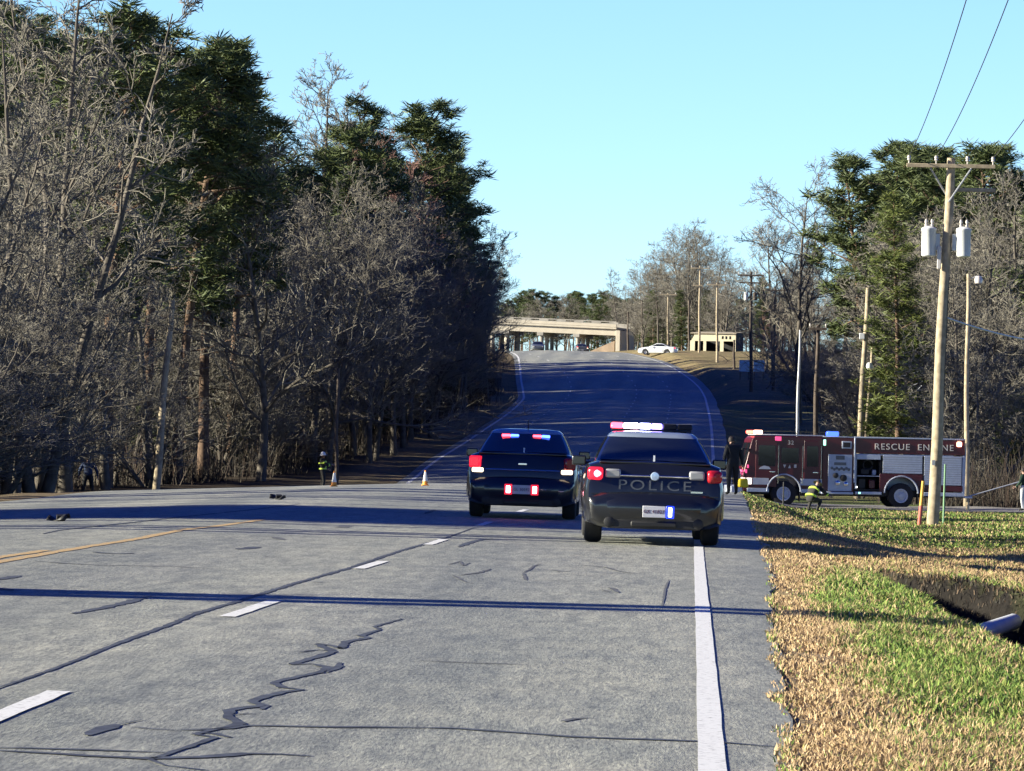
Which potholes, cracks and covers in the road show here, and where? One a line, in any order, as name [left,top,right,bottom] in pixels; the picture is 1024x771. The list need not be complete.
crack [448,539,490,584]
crack [522,564,636,593]
crack [73,596,150,613]
